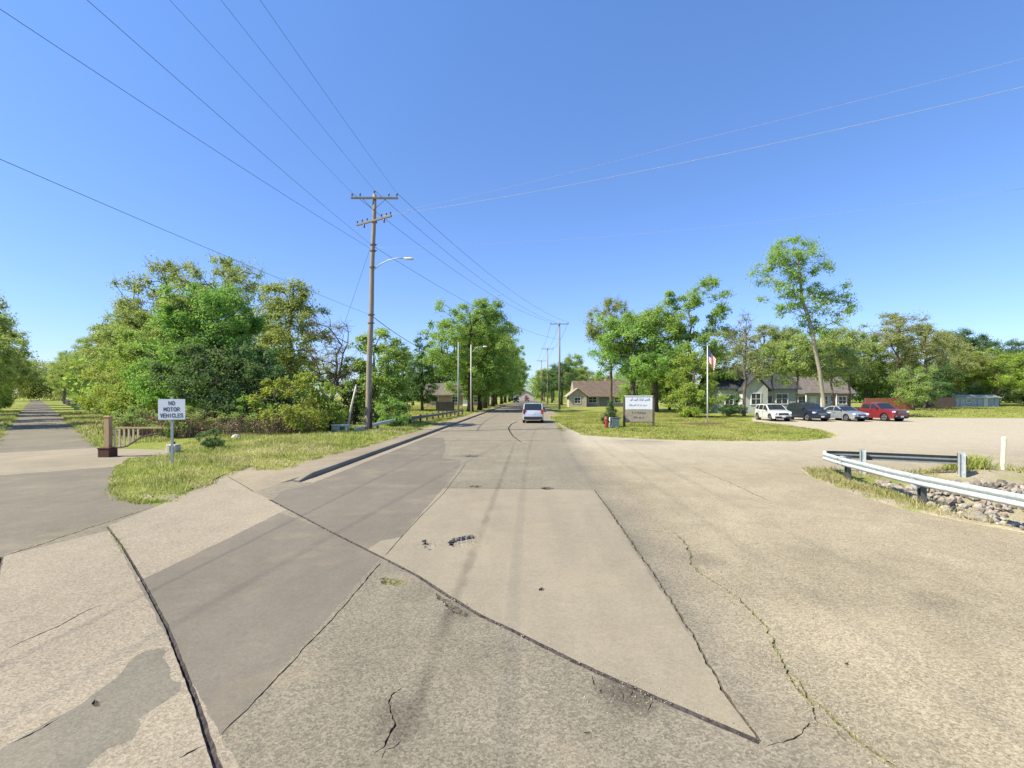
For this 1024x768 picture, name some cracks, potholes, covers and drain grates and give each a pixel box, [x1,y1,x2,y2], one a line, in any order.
crack [634,529,898,768]
crack [7,604,104,649]
crack [375,686,404,758]
pothole [448,534,478,547]
